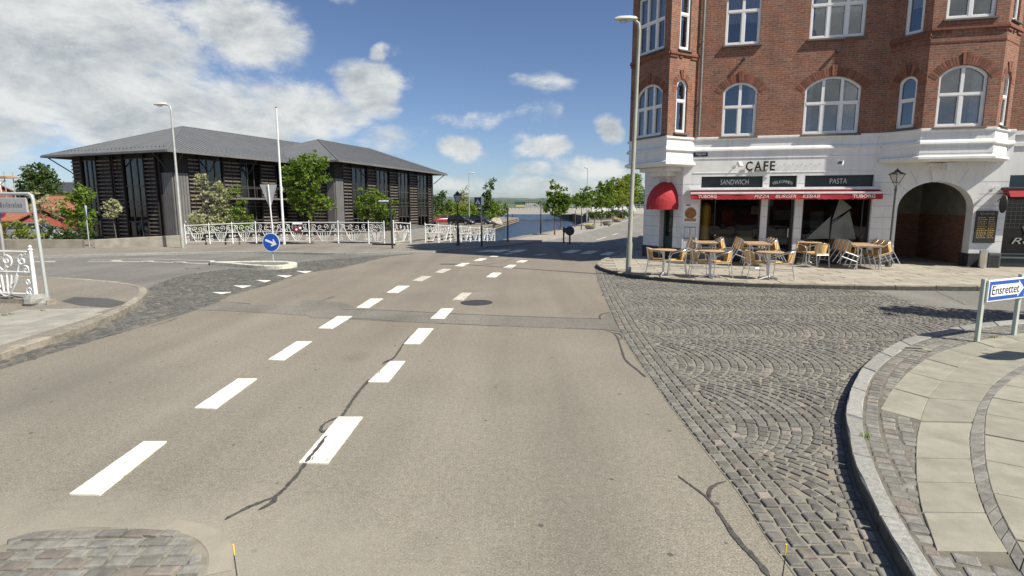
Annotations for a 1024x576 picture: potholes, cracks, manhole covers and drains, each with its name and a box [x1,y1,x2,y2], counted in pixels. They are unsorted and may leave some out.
crack [305,371,380,462]
